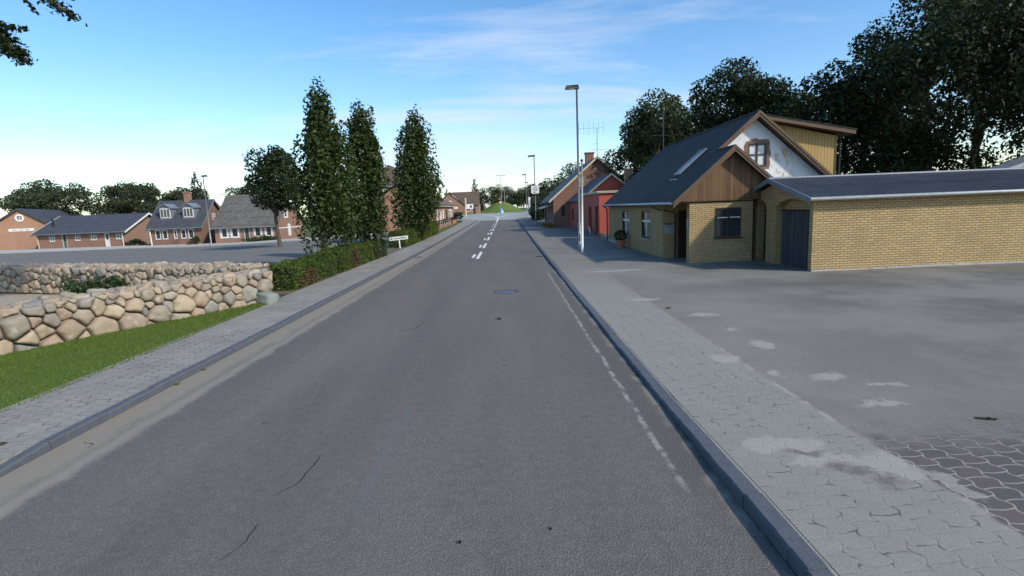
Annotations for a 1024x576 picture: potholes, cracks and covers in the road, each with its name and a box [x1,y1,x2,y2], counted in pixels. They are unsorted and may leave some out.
crack [271,455,321,497]
